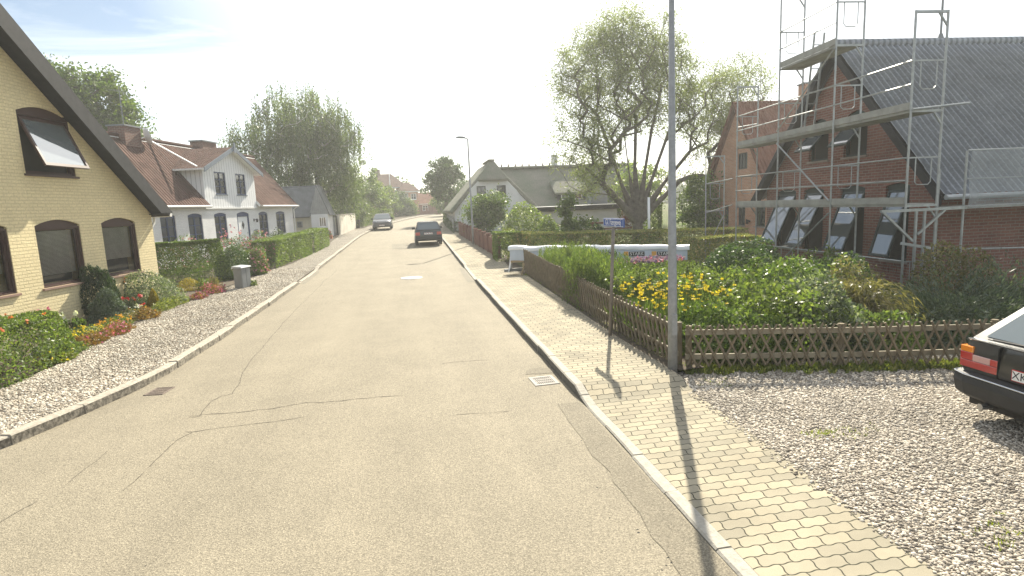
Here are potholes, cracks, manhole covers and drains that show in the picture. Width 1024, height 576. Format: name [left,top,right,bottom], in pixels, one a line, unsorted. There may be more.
drain grate [528,375,560,386]
crack [125,271,401,489]
drain grate [143,387,175,396]
